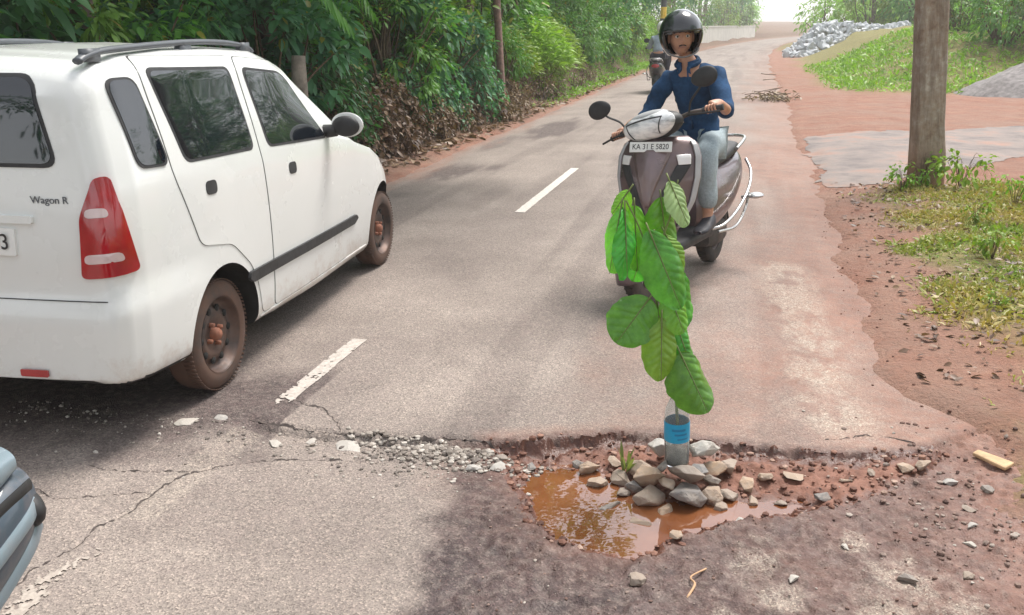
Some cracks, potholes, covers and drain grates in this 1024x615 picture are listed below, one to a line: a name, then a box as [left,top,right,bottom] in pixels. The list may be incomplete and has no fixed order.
pothole [493,431,942,561]
crack [16,458,352,586]
